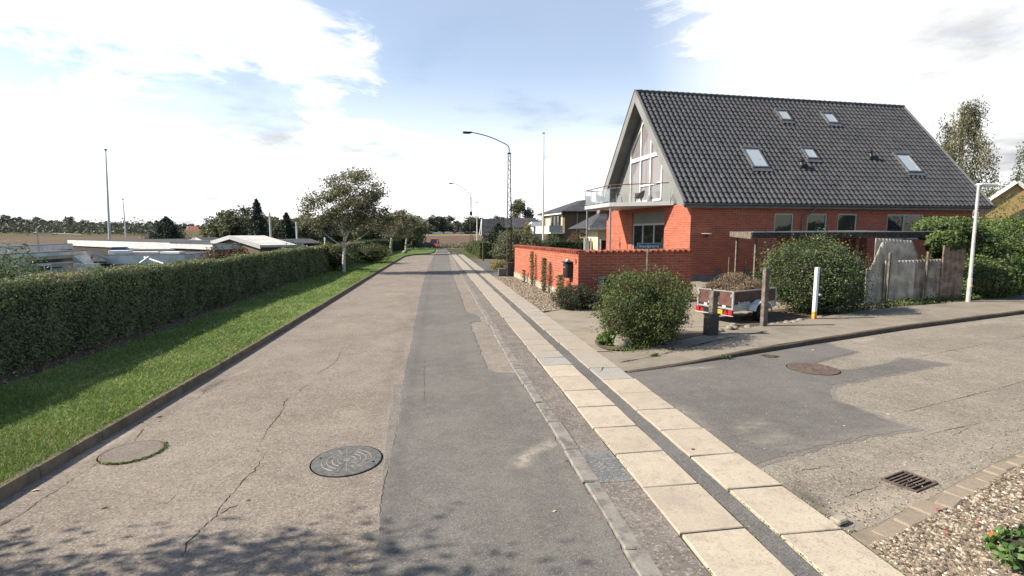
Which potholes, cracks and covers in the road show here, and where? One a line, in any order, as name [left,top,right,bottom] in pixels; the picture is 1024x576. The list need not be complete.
manhole cover [96,440,168,465]
manhole cover [309,446,383,477]
manhole cover [786,363,841,375]
crack [182,356,339,556]
drain grate [881,470,939,493]
